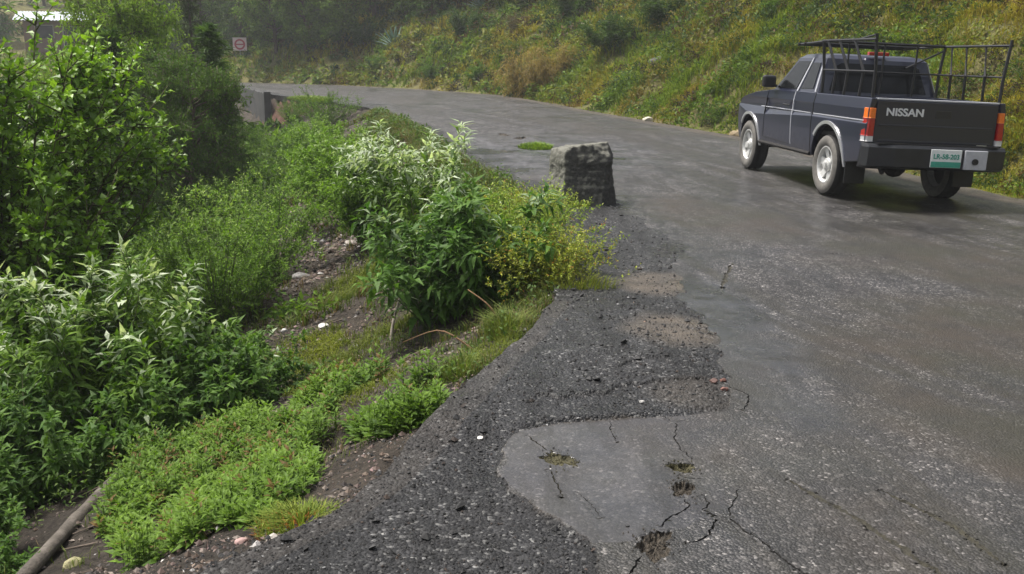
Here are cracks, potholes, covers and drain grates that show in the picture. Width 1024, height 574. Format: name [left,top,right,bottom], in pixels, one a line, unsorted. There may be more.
pothole [534,447,583,472]
pothole [660,459,702,476]
crack [654,414,1008,574]
crack [716,263,739,288]
crack [525,435,550,452]
crack [623,555,645,574]
pothole [621,527,681,569]
pothole [666,475,700,504]
crack [546,469,605,518]
crack [716,382,753,411]
